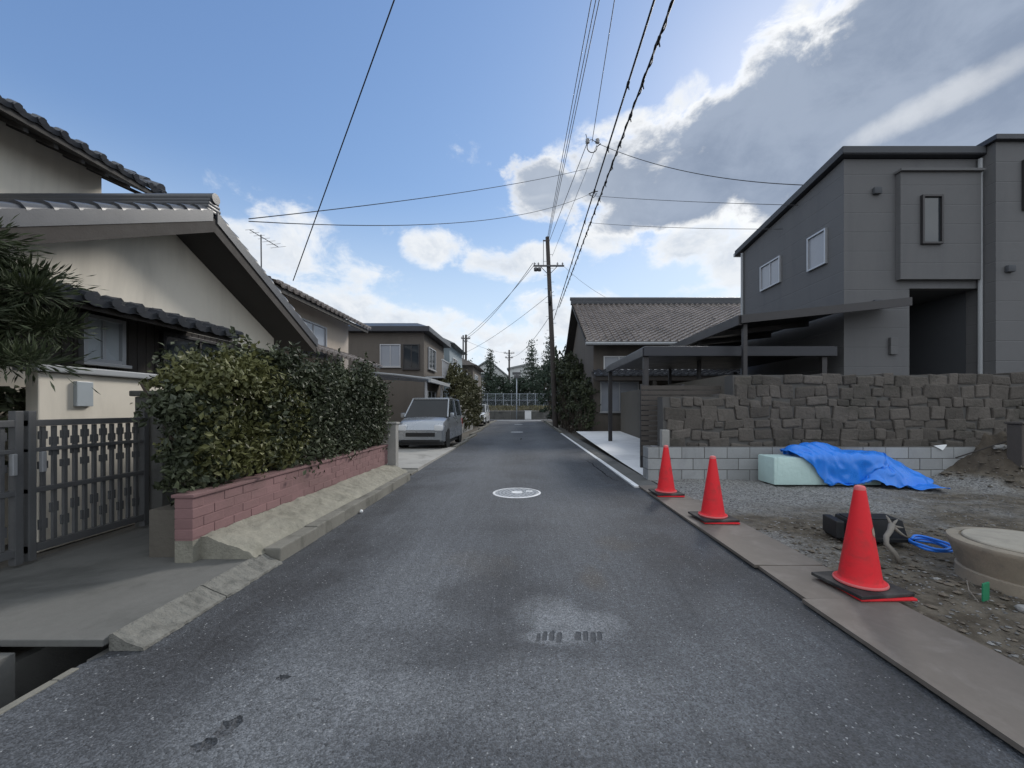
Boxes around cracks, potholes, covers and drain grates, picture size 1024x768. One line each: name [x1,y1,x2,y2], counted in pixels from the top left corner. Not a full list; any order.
pothole [188,738,218,753]
manhole cover [493,488,541,498]
pothole [212,715,243,738]
